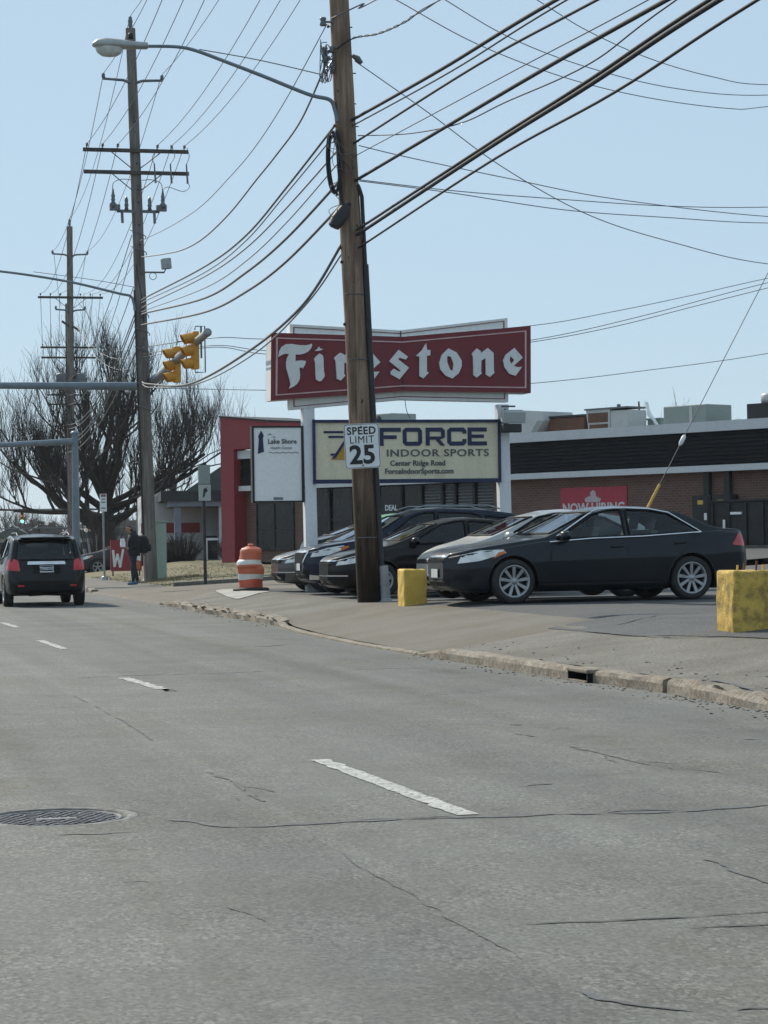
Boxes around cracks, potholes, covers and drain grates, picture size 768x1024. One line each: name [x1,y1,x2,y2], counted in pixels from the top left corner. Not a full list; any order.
crack [209,772,275,801]
crack [510,724,720,773]
crack [167,804,768,827]
crack [581,989,693,1011]
manhole cover [0,807,139,827]
crack [340,852,768,960]
drain grate [566,666,607,683]
crack [74,695,152,740]
